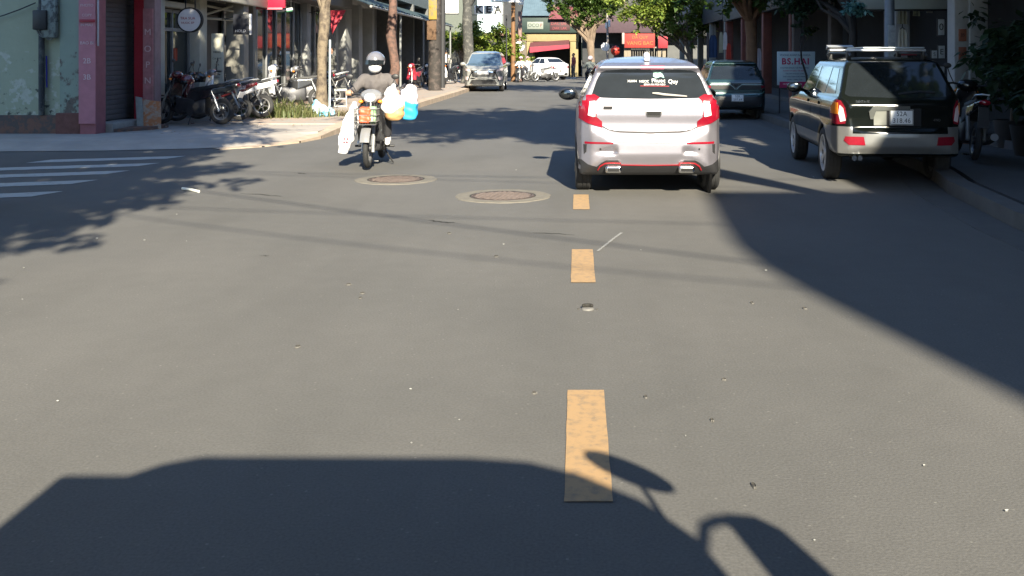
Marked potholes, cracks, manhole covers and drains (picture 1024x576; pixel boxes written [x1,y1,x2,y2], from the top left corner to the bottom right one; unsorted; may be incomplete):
manhole cover [354,174,437,185]
manhole cover [455,189,551,203]
